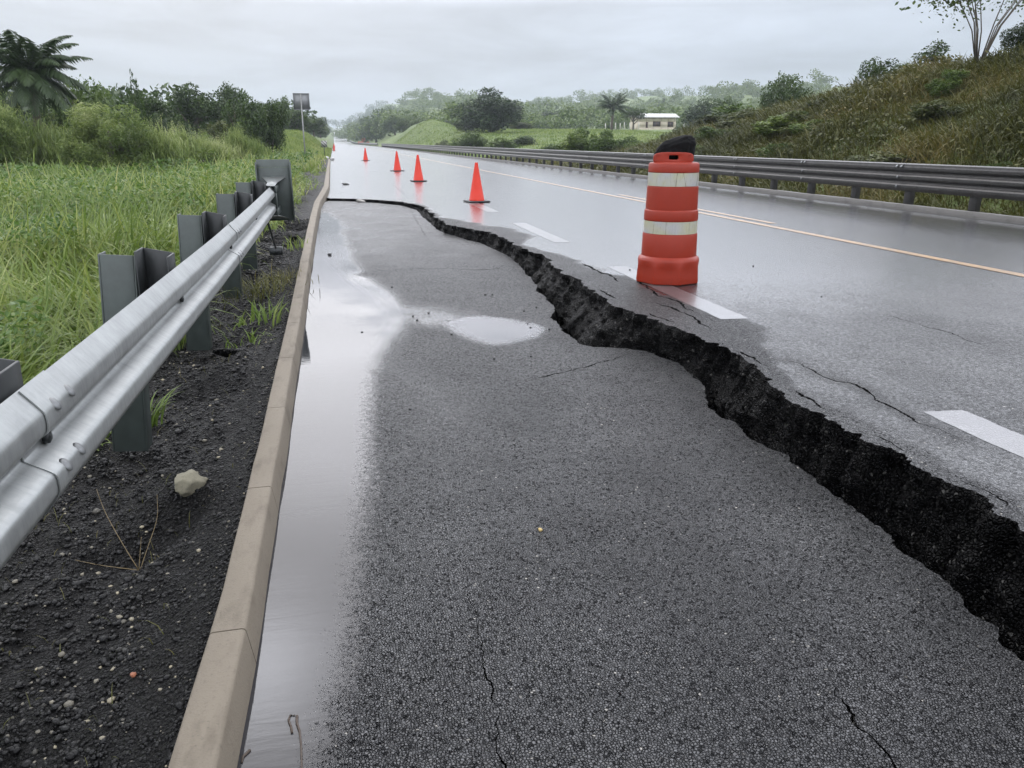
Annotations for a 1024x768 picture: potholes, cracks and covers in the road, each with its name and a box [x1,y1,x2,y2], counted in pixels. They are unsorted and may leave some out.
crack [330,198,1024,768]
